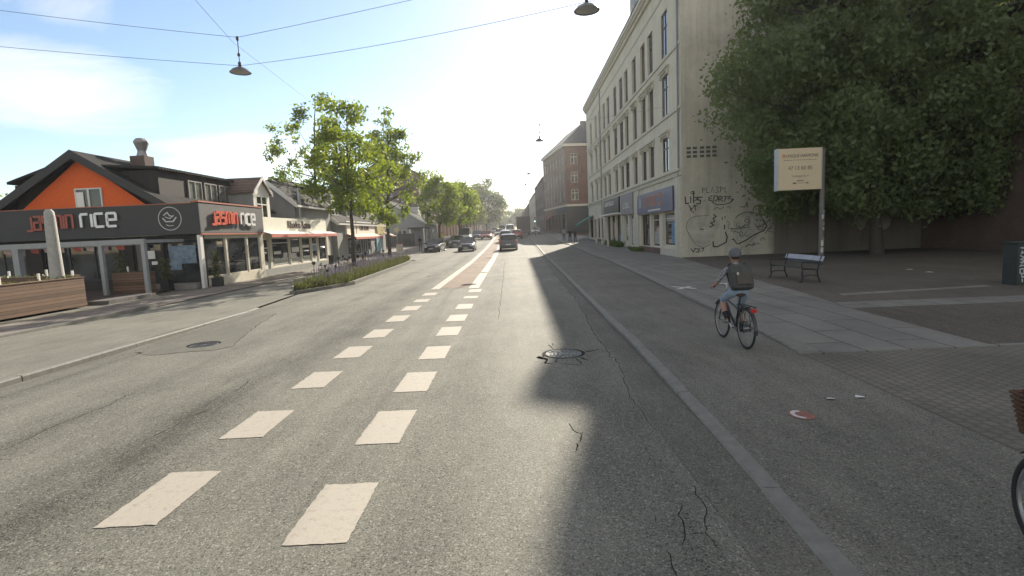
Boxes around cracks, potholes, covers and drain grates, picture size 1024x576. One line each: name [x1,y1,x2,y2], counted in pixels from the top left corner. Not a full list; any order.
crack [655,483,717,576]
manhole cover [542,349,585,359]
